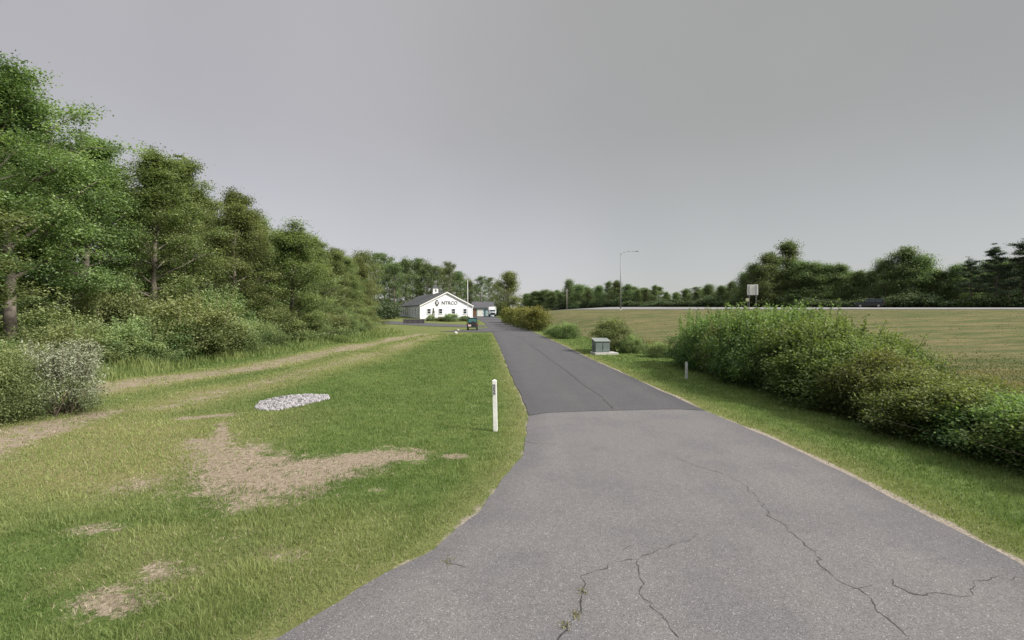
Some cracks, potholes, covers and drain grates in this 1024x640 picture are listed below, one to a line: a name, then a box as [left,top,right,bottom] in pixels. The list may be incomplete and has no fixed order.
crack [684,461,1021,636]
crack [557,535,696,640]
